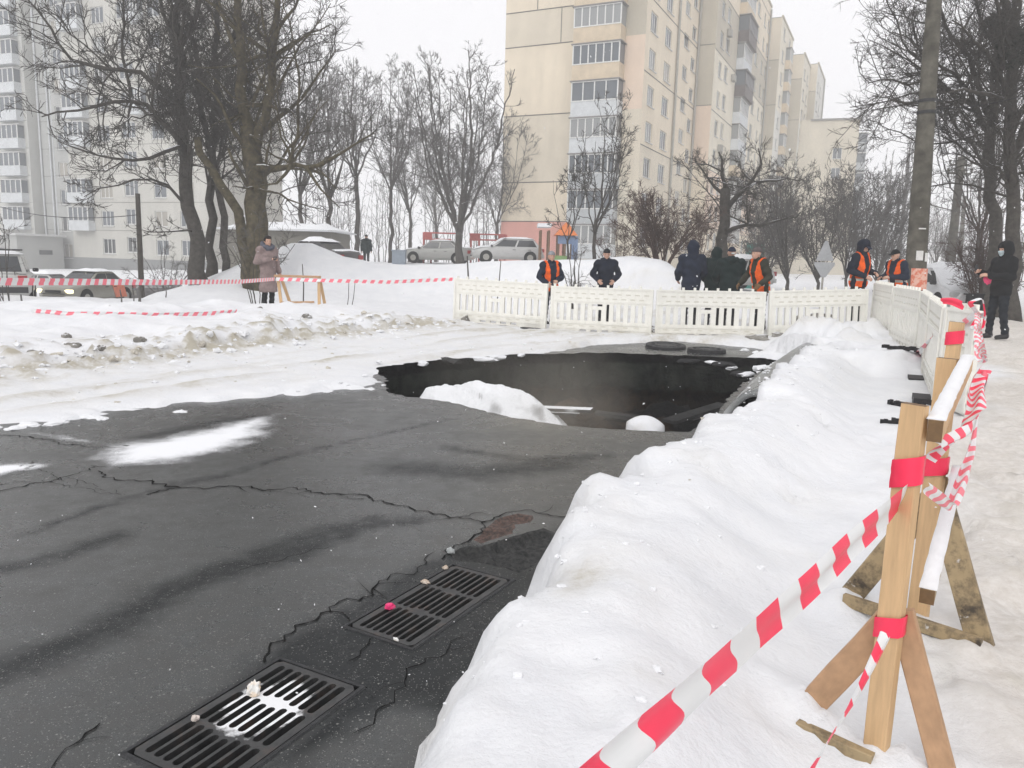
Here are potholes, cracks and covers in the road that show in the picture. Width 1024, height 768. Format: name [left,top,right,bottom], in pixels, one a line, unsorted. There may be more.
crack [51,723,103,768]
crack [352,636,474,734]
drain grate [120,656,366,768]
drain grate [342,563,515,688]
crack [0,462,565,662]
